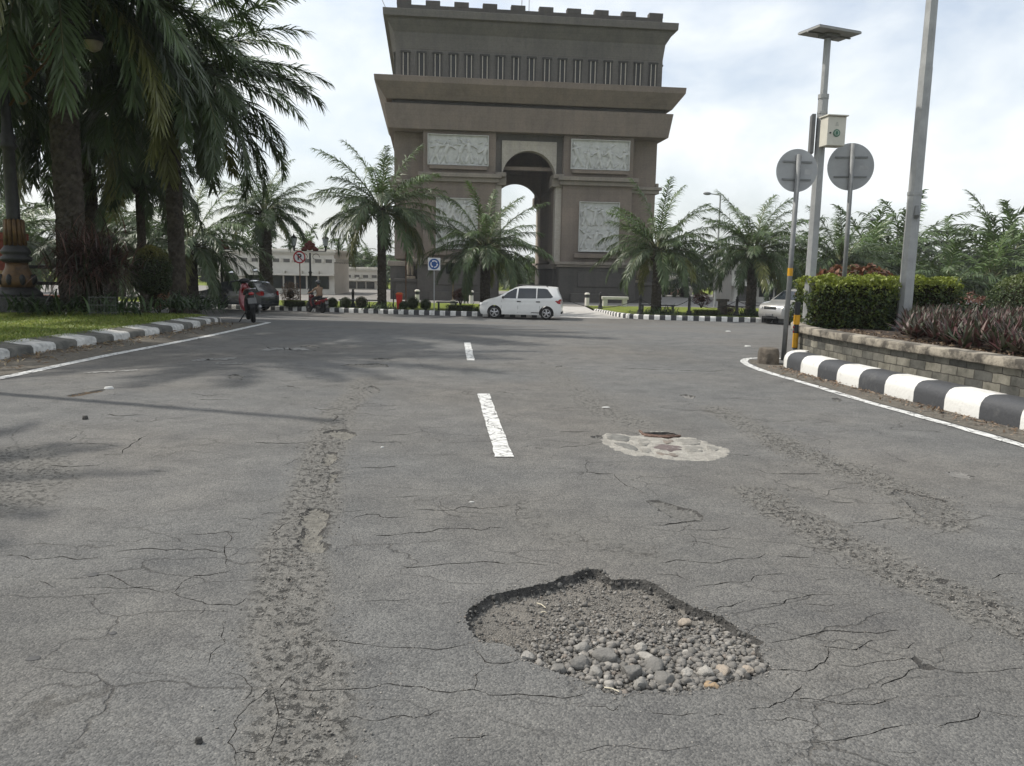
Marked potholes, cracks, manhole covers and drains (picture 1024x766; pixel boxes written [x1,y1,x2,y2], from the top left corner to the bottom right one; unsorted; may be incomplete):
crack [305,640,585,699]
crack [406,496,511,511]
pothole [465,569,772,693]
crack [579,745,697,753]
crack [195,627,318,761]
crack [662,520,837,606]
crack [748,623,1022,743]
crack [19,498,284,612]
crack [341,710,440,722]
crack [338,510,500,536]
crack [50,418,173,467]
